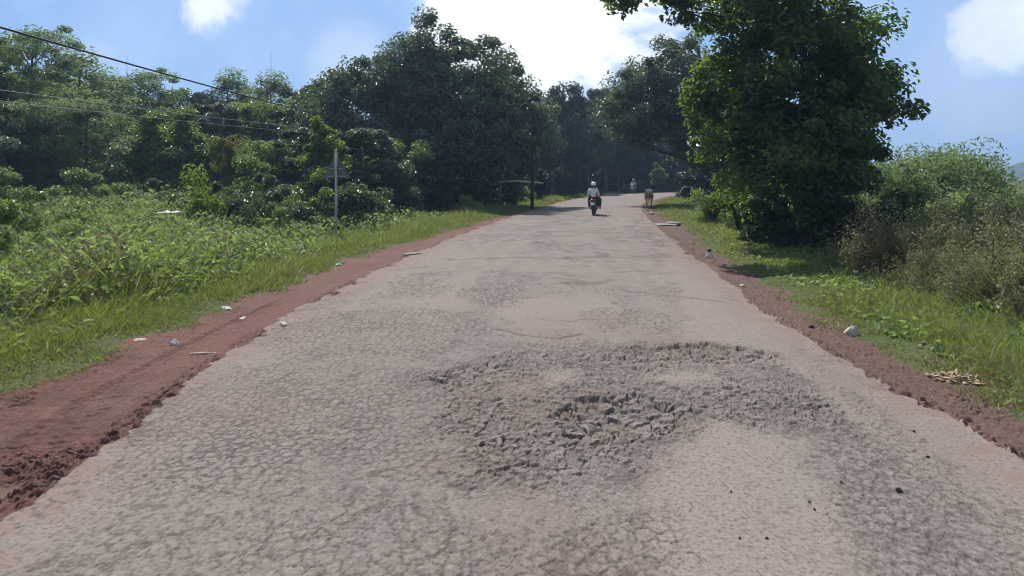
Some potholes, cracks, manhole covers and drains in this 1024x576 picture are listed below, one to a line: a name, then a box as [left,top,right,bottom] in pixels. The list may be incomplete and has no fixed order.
pothole [548,386,703,448]
crack [3,222,726,576]
pothole [599,341,787,368]
pothole [423,360,523,390]
